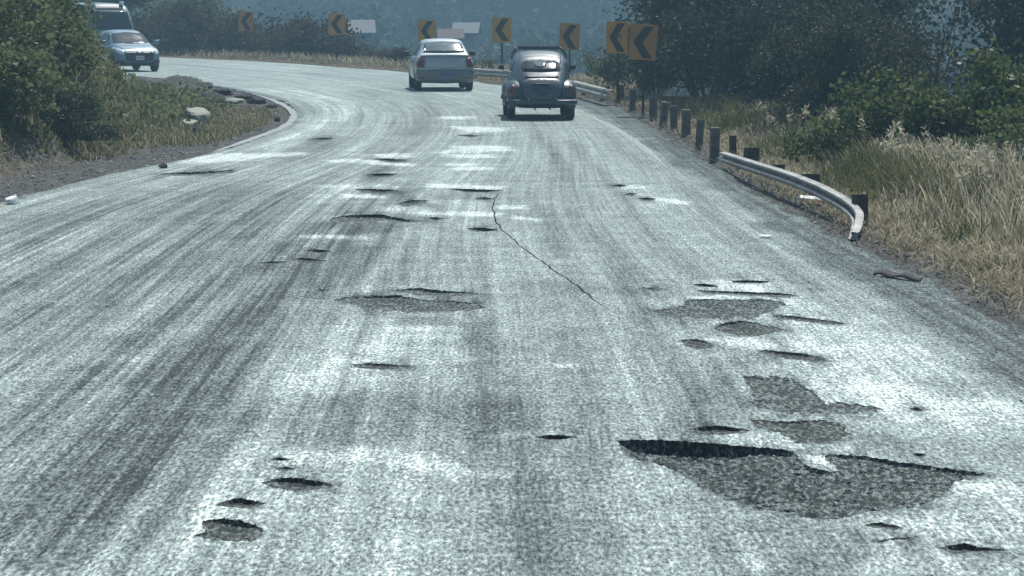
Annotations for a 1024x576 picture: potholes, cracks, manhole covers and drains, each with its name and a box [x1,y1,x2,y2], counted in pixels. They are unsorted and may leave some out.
pothole [714,321,786,337]
pothole [330,214,421,223]
pothole [680,339,714,349]
pothole [616,439,990,520]
pothole [262,477,333,492]
pothole [750,420,850,444]
pothole [195,518,265,542]
pothole [941,543,1008,554]
pothole [760,350,825,362]
pothole [333,295,486,313]
pothole [391,288,482,297]
pothole [688,425,750,435]
